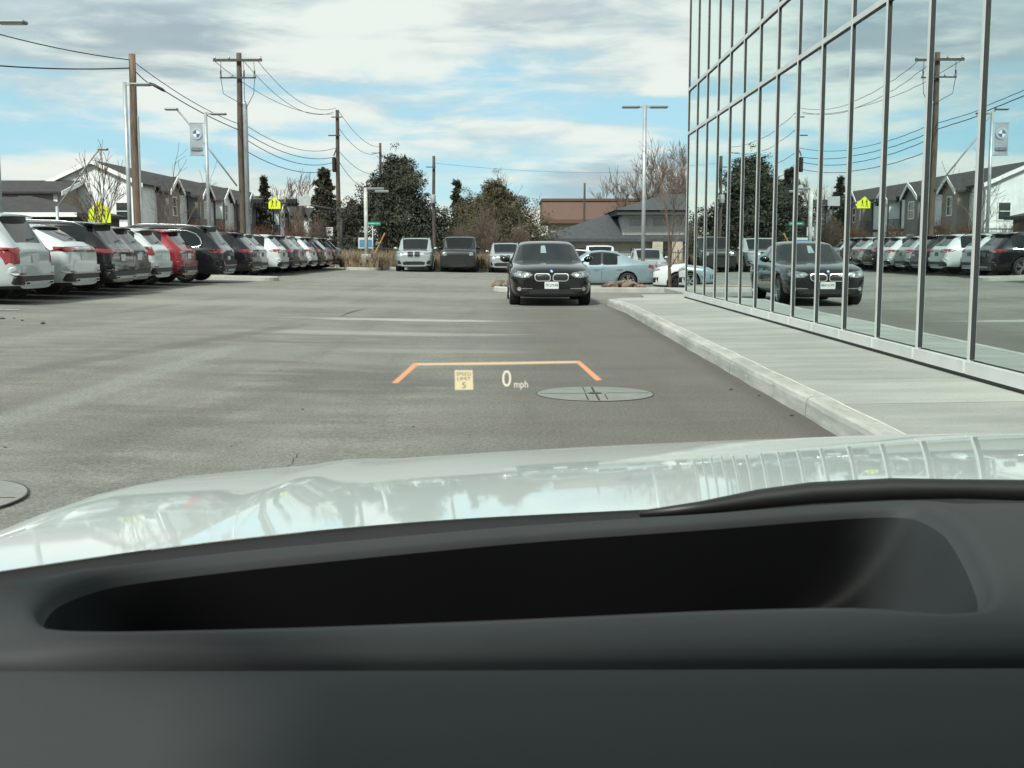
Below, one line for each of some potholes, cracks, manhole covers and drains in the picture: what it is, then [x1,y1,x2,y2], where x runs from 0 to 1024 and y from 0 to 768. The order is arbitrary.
manhole cover [0,480,28,507]
manhole cover [537,387,654,401]
